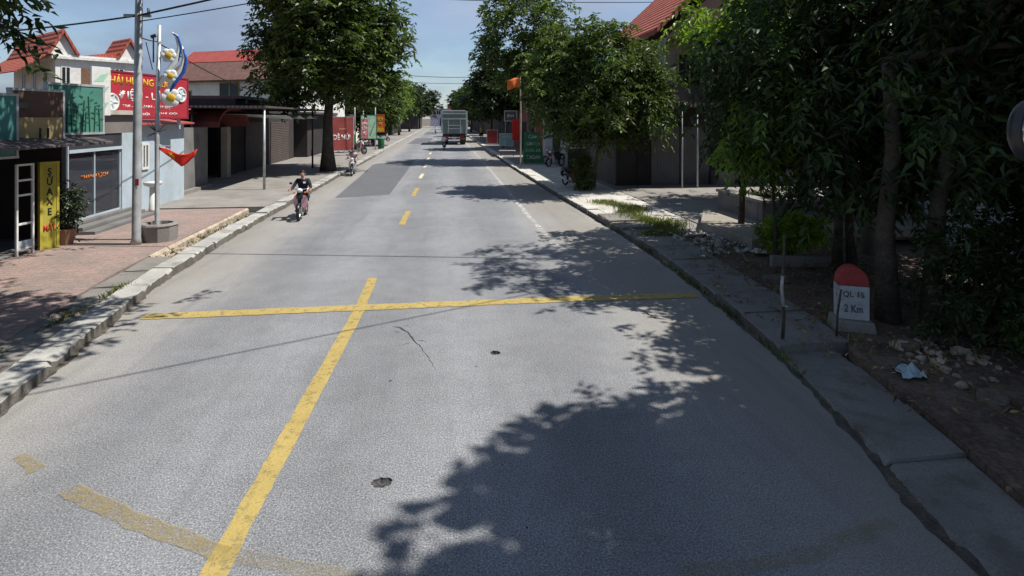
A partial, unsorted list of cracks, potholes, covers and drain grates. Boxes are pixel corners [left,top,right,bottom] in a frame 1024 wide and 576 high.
pothole [371,477,392,488]
crack [395,325,433,364]
